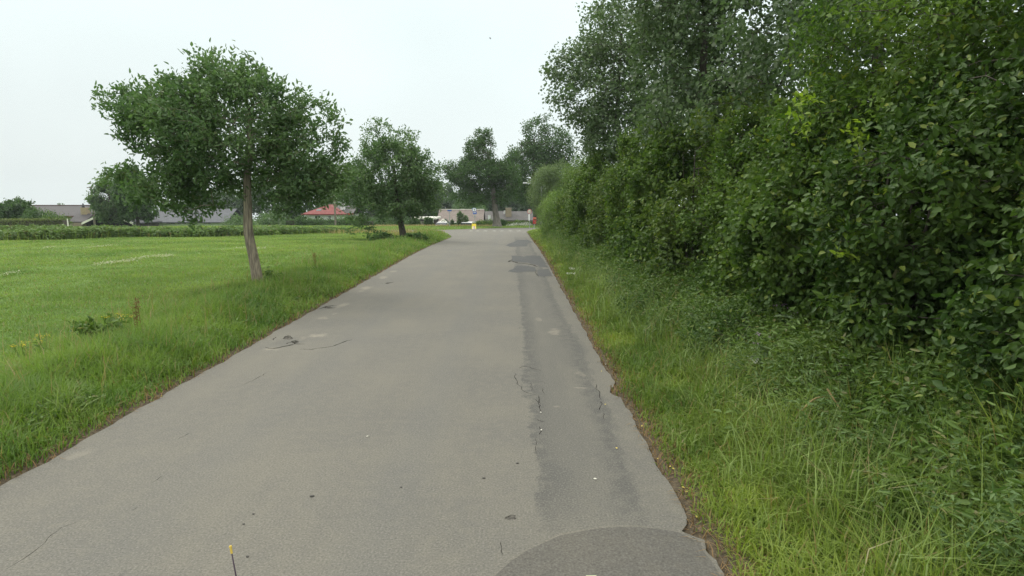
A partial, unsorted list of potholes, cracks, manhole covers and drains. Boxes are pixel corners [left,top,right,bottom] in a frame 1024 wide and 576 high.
crack [514,366,545,450]
